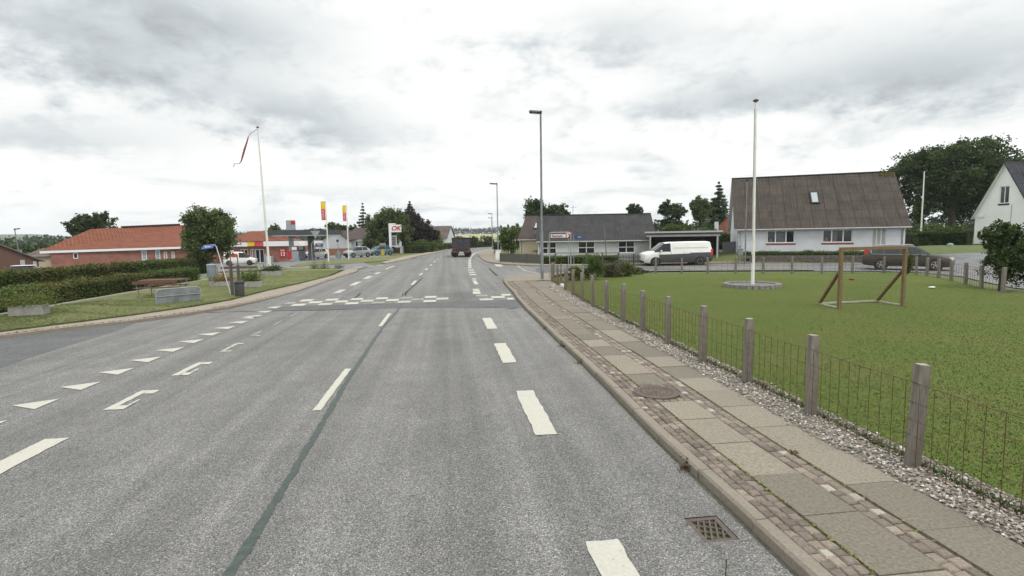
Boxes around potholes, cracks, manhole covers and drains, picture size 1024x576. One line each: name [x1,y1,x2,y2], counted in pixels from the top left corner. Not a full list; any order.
drain grate [684,516,739,542]
manhole cover [634,385,680,400]
